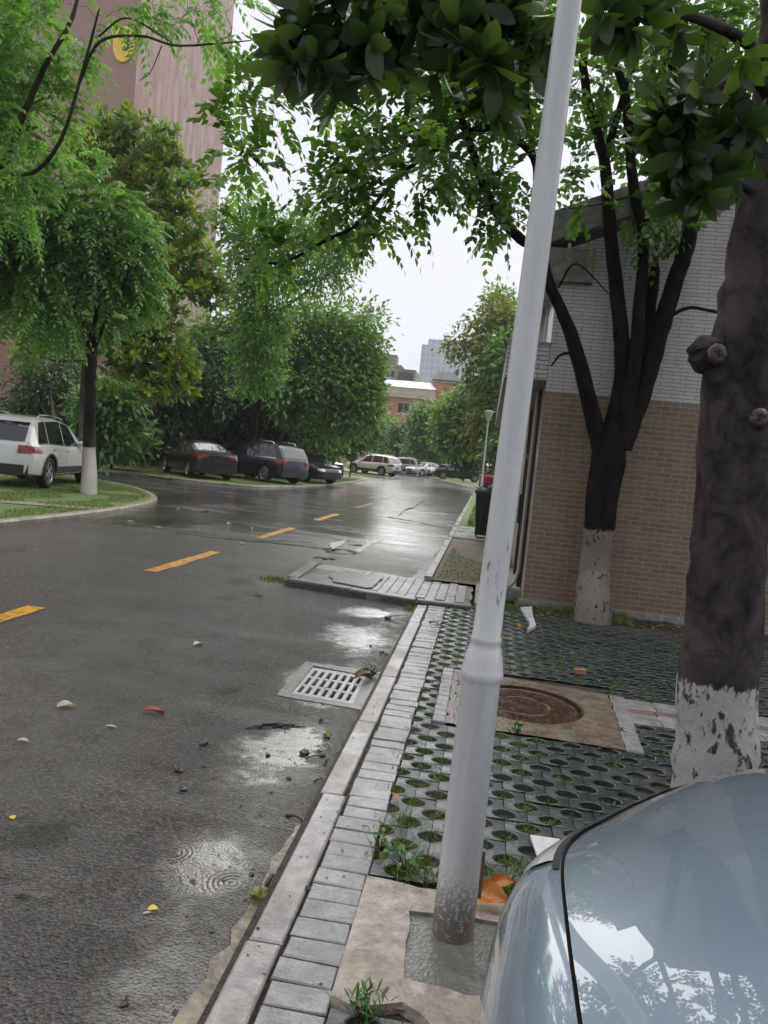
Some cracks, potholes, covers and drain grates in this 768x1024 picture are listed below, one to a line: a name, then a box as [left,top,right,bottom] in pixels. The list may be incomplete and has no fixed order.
drain grate [292,666,366,704]
manhole cover [497,684,584,724]
crack [389,498,444,528]
